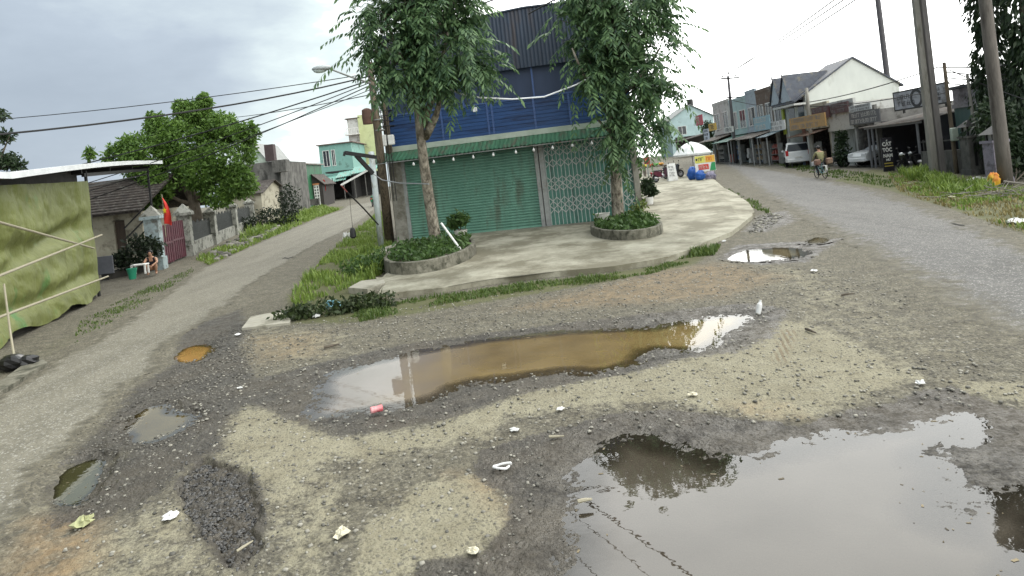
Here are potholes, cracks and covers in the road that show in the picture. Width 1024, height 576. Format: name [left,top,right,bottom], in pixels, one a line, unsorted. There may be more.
pothole [155,340,228,366]
pothole [718,245,824,263]
pothole [511,402,1024,576]
pothole [102,395,222,452]
pothole [274,307,780,432]
pothole [21,449,126,513]
